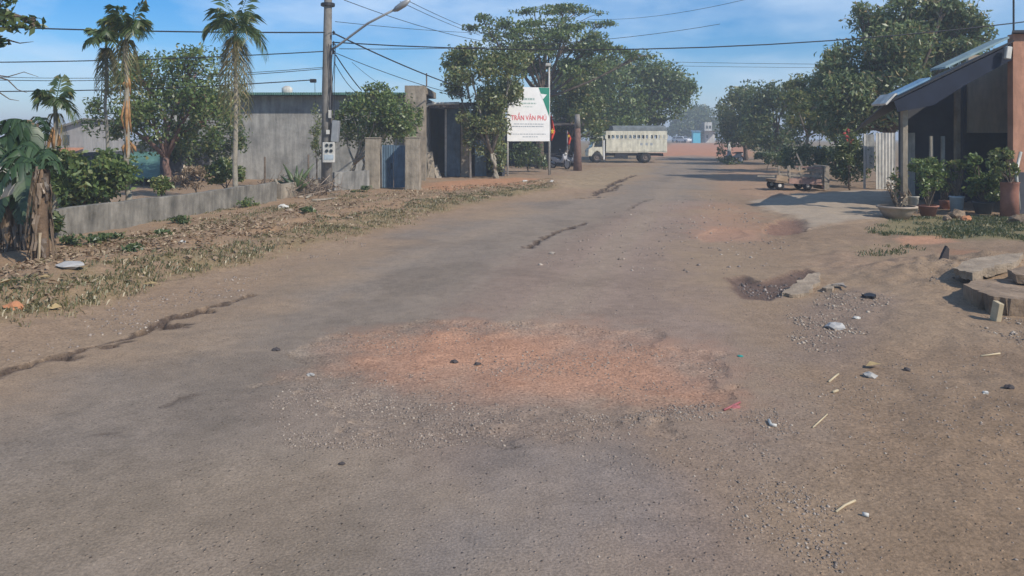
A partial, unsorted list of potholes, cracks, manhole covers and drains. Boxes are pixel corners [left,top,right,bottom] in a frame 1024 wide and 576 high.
crack [522,223,587,249]
crack [0,294,255,376]
pothole [724,268,816,301]
crack [573,175,653,209]
